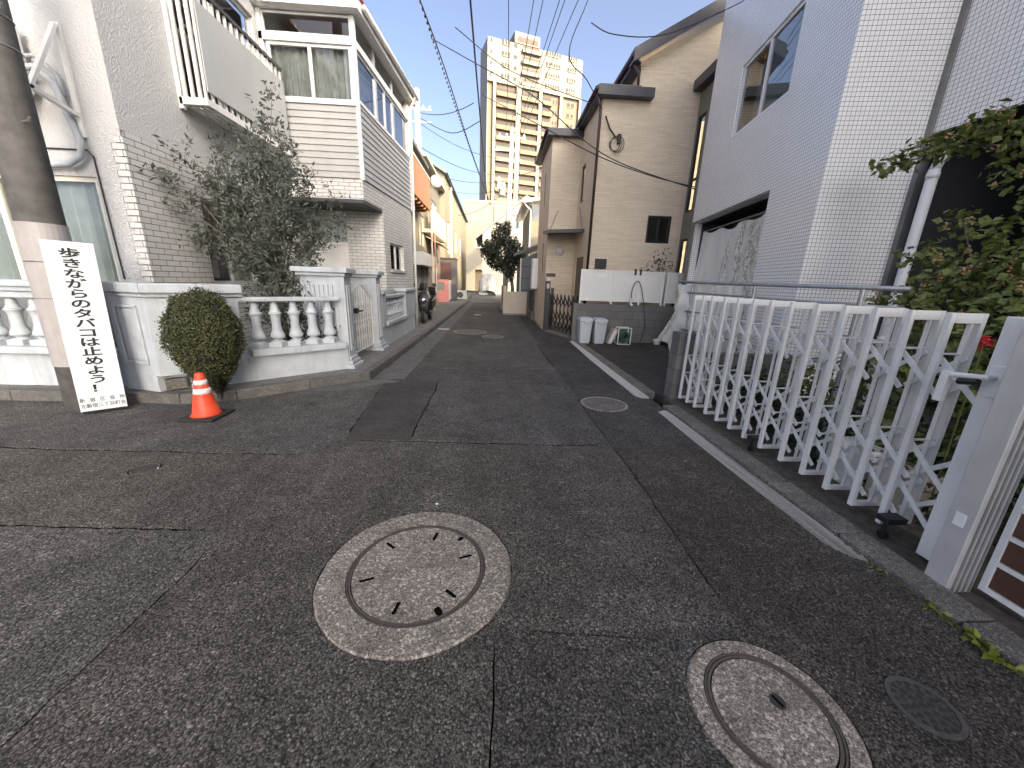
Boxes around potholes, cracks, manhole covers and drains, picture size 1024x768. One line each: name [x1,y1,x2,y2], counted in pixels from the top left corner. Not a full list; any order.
manhole cover [313,512,512,662]
manhole cover [686,640,873,768]
manhole cover [128,463,161,475]
manhole cover [580,397,628,412]
